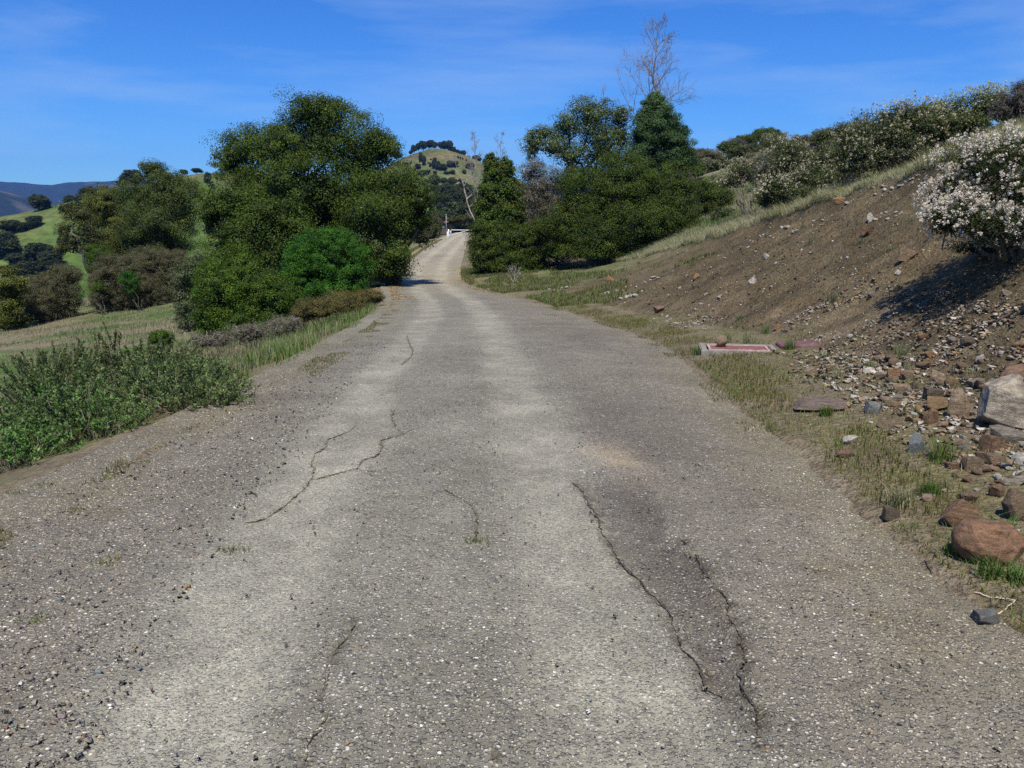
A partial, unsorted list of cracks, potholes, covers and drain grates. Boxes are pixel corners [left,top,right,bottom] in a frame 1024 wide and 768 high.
crack [443,489,479,539]
crack [572,482,758,740]
crack [304,616,356,765]
